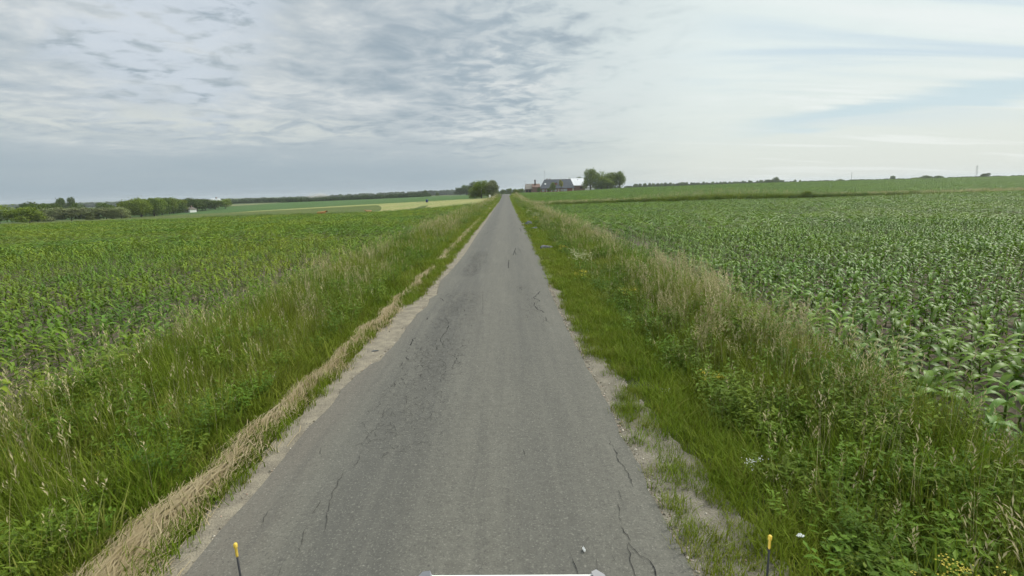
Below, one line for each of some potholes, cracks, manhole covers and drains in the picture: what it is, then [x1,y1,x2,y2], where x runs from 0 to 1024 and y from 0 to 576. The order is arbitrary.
crack [596,441,656,576]
crack [278,291,477,575]
